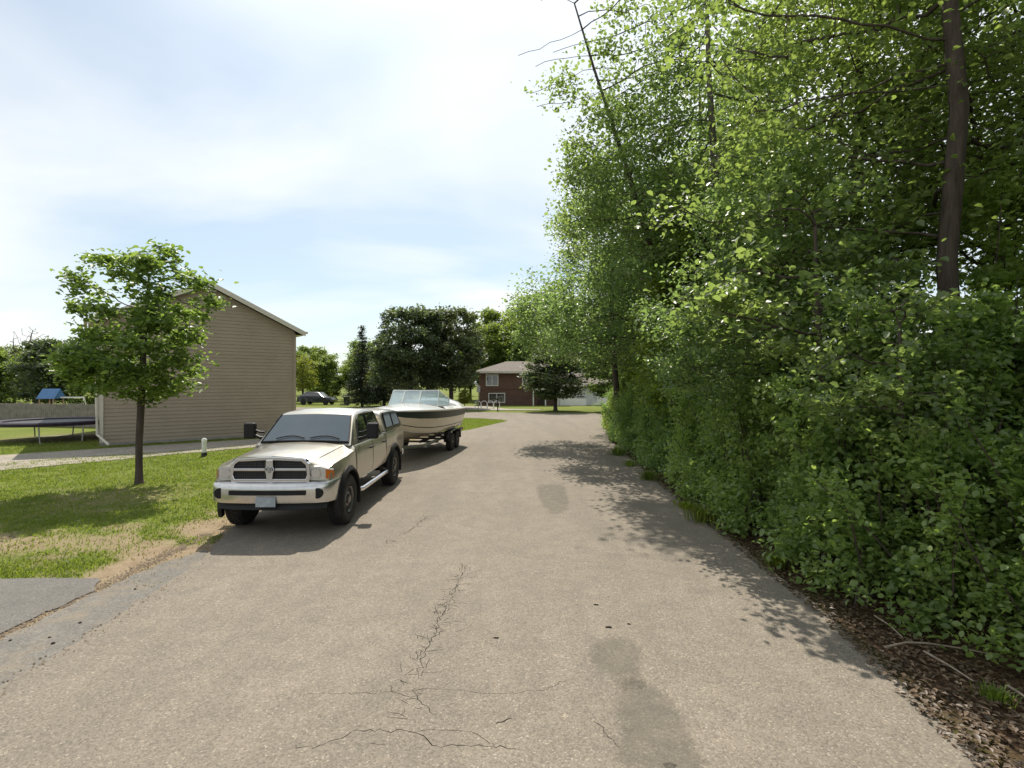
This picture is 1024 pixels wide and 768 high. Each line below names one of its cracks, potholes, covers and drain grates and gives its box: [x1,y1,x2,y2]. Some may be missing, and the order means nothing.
crack [297,564,565,749]
